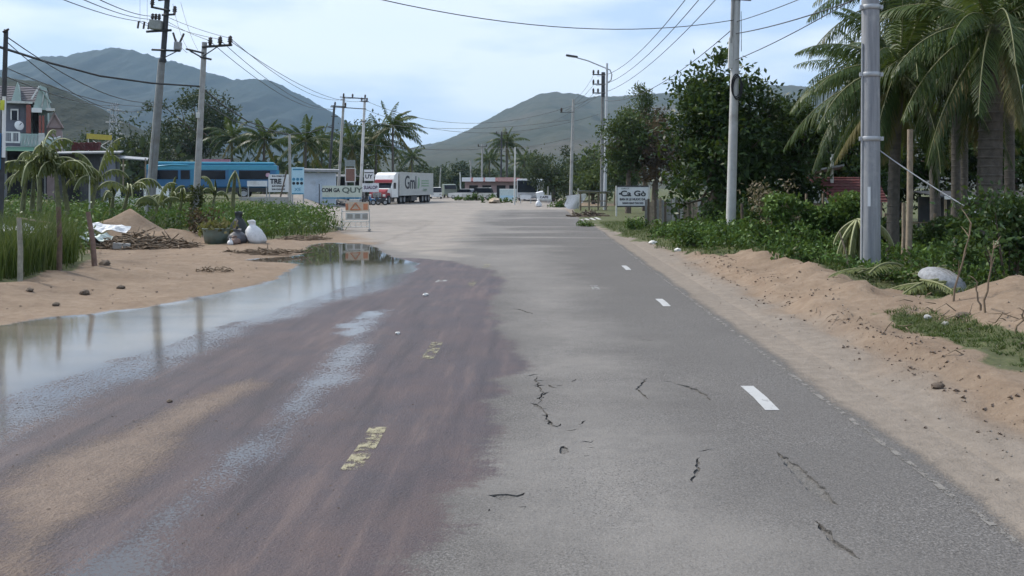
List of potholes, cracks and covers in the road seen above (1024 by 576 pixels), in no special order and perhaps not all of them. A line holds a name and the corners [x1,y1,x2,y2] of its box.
crack [529,374,593,456]
crack [816,521,860,559]
crack [665,381,710,400]
crack [690,448,716,482]
